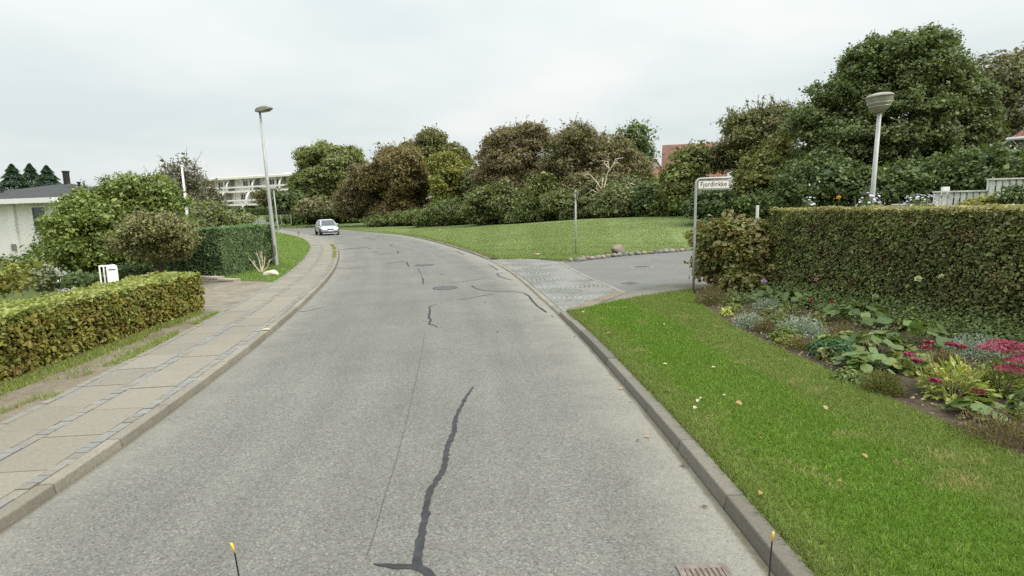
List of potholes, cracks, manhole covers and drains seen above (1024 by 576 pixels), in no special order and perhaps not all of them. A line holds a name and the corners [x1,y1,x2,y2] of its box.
drain grate [676,563,733,576]
crack [367,333,425,554]
